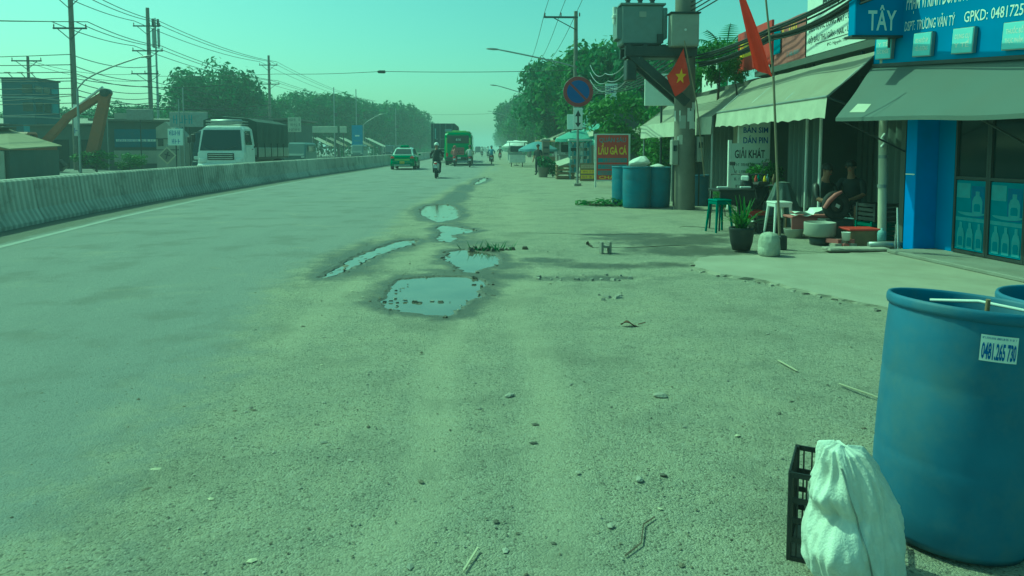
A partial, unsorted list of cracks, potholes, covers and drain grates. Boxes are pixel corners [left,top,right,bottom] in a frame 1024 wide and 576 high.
pothole [440,249,505,273]
pothole [317,239,420,278]
pothole [417,204,463,222]
pothole [369,275,496,318]
pothole [434,224,479,242]
